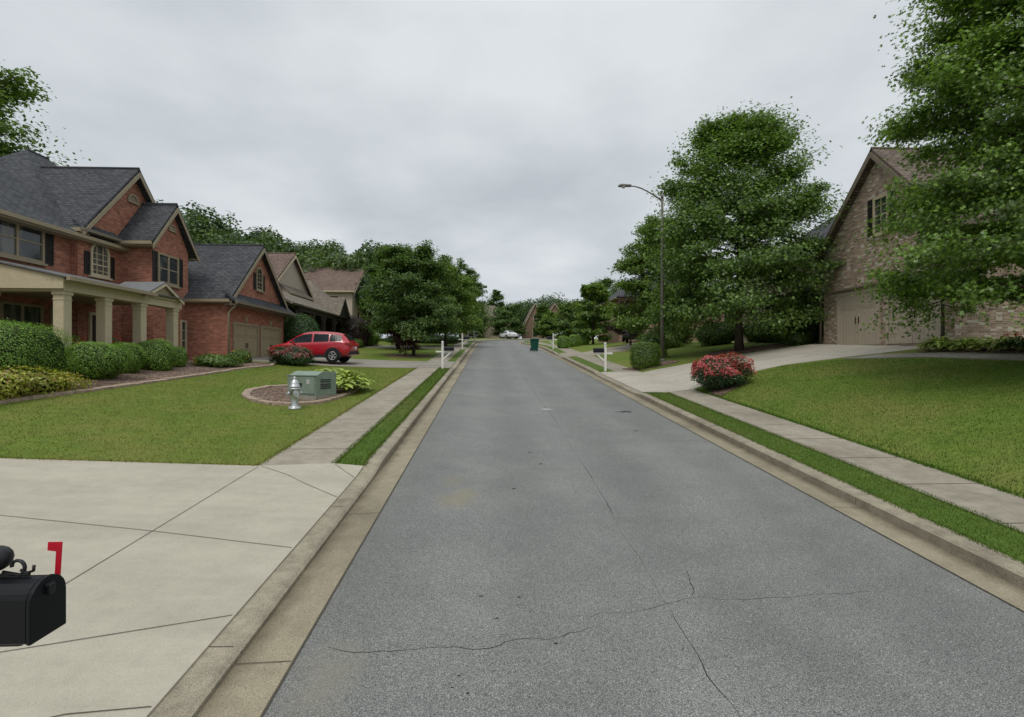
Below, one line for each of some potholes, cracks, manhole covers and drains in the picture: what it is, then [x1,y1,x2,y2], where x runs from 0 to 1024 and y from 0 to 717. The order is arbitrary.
crack [326,627,590,653]
crack [528,383,868,716]
